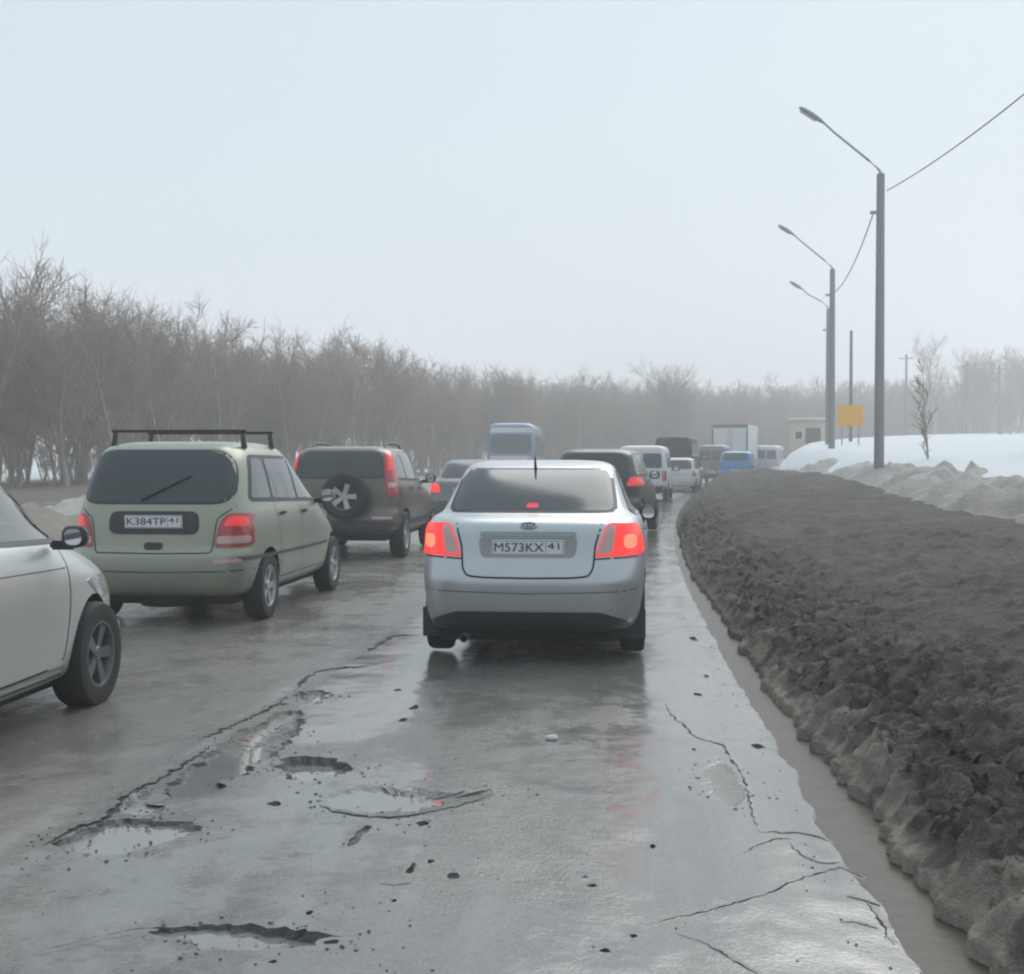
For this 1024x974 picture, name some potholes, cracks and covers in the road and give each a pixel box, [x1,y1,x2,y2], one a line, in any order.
pothole [308,782,513,821]
pothole [145,708,316,806]
pothole [38,816,215,861]
crack [648,704,900,974]
pothole [263,753,364,785]
pothole [134,918,356,957]
